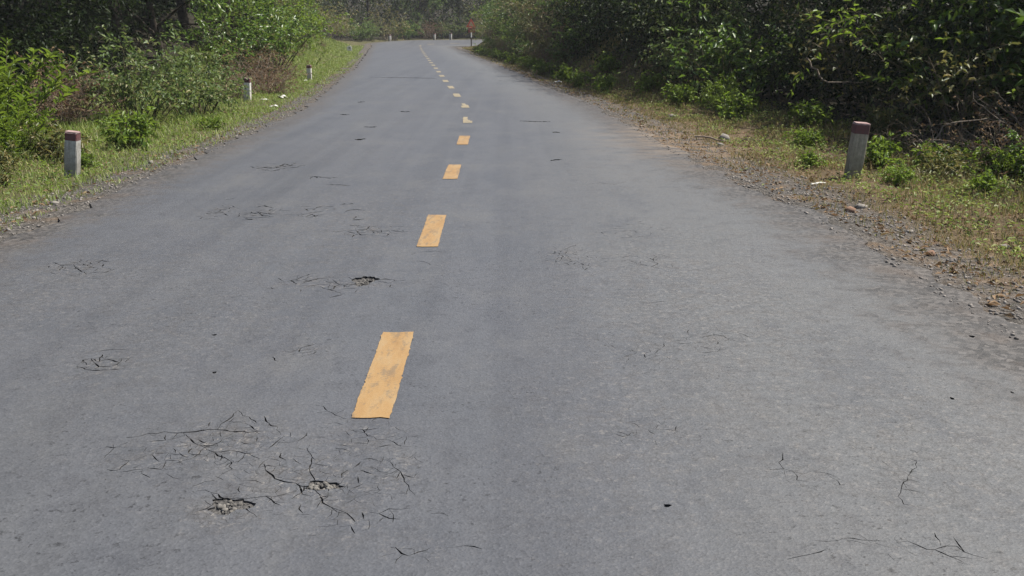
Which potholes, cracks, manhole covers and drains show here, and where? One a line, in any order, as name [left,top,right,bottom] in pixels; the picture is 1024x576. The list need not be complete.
crack [272,274,401,296]
crack [306,203,399,237]
crack [97,411,389,536]
pothole [208,498,256,515]
pothole [304,481,342,491]
crack [298,406,419,498]
pothole [352,276,379,286]
crack [798,533,979,564]
